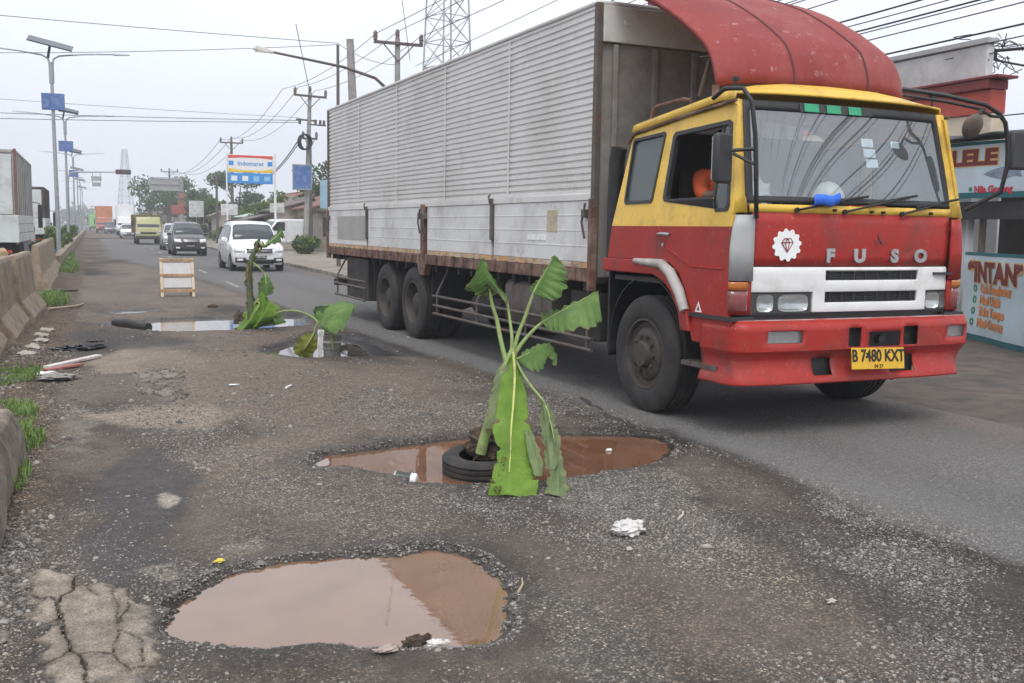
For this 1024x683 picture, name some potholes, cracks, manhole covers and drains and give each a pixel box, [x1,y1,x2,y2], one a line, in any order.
pothole [251,331,419,358]
crack [19,575,161,683]
pothole [147,539,530,653]
pothole [296,427,685,485]
pothole [105,315,314,331]
